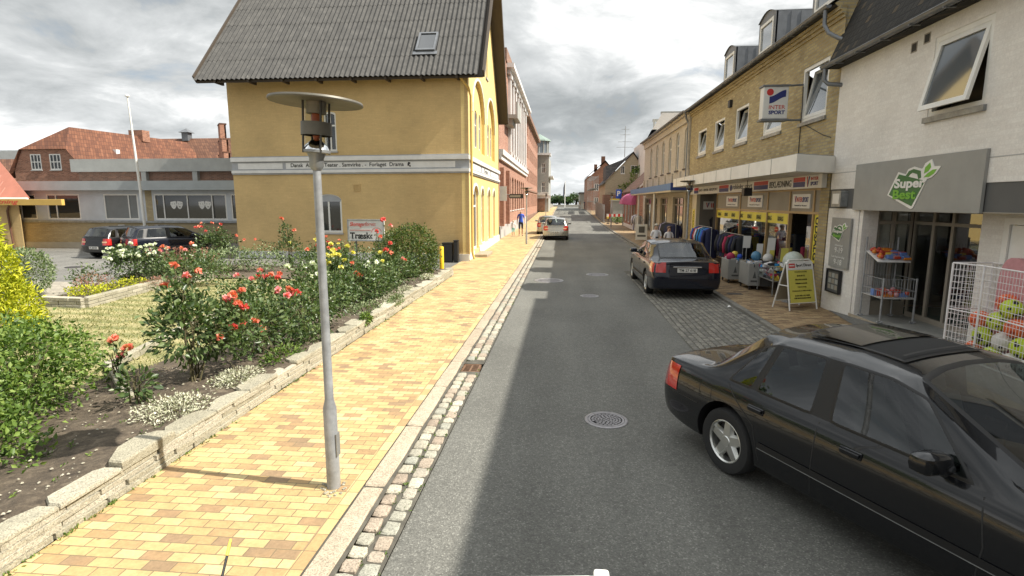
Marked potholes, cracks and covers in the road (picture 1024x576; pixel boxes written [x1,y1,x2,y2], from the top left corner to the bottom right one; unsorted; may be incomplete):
manhole cover [585,411,628,429]
drain grate [461,364,482,380]
